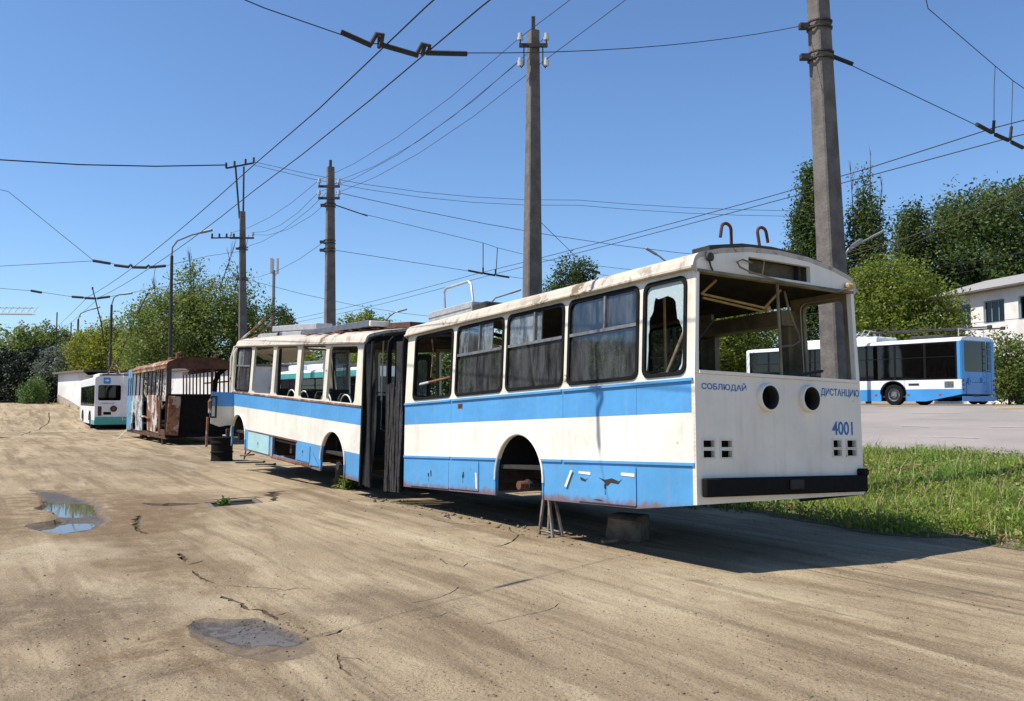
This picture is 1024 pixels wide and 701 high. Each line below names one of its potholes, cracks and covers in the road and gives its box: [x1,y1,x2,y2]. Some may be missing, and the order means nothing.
crack [130,491,284,534]
crack [337,654,366,677]
pothole [186,617,316,663]
crack [177,553,304,620]
pothole [24,489,112,533]
drain grate [205,498,263,507]
